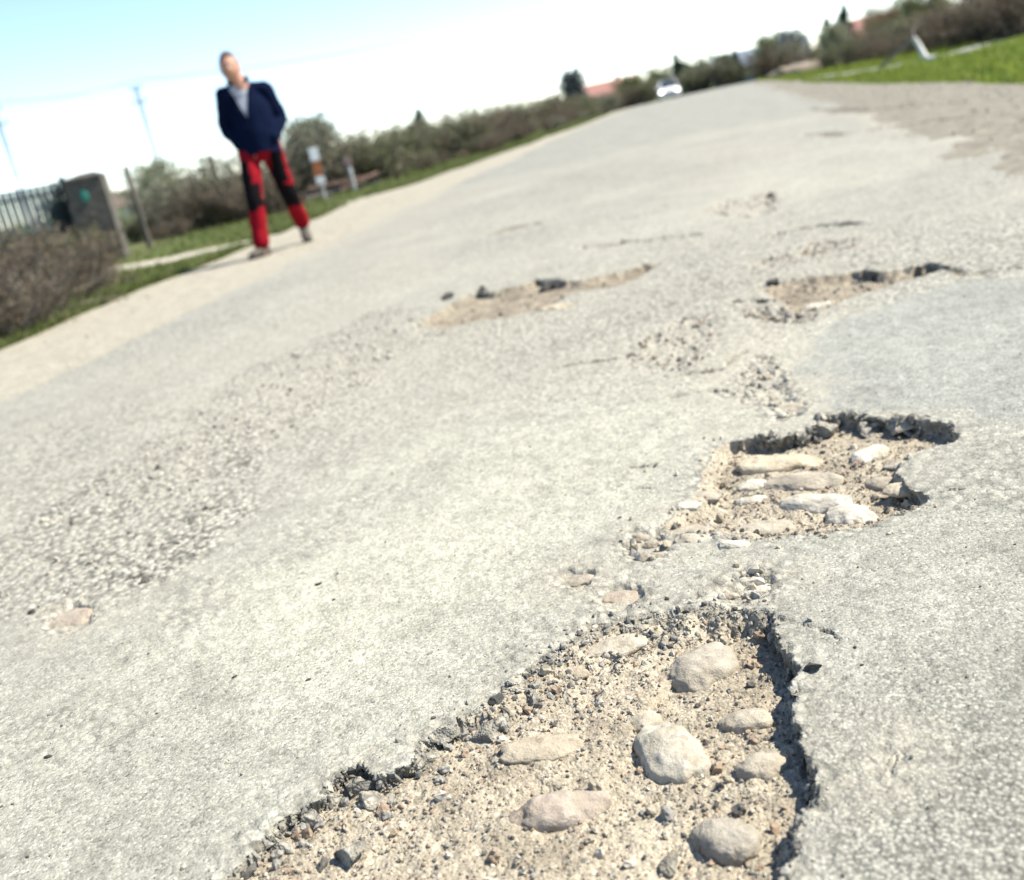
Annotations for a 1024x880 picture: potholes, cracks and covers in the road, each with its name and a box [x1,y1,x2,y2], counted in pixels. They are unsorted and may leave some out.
pothole [227,603,819,880]
pothole [758,264,949,312]
pothole [614,525,679,563]
pothole [662,414,961,542]
pothole [725,355,809,425]
pothole [735,303,824,324]
pothole [707,192,781,218]
pothole [414,264,657,329]
pothole [626,313,729,373]
